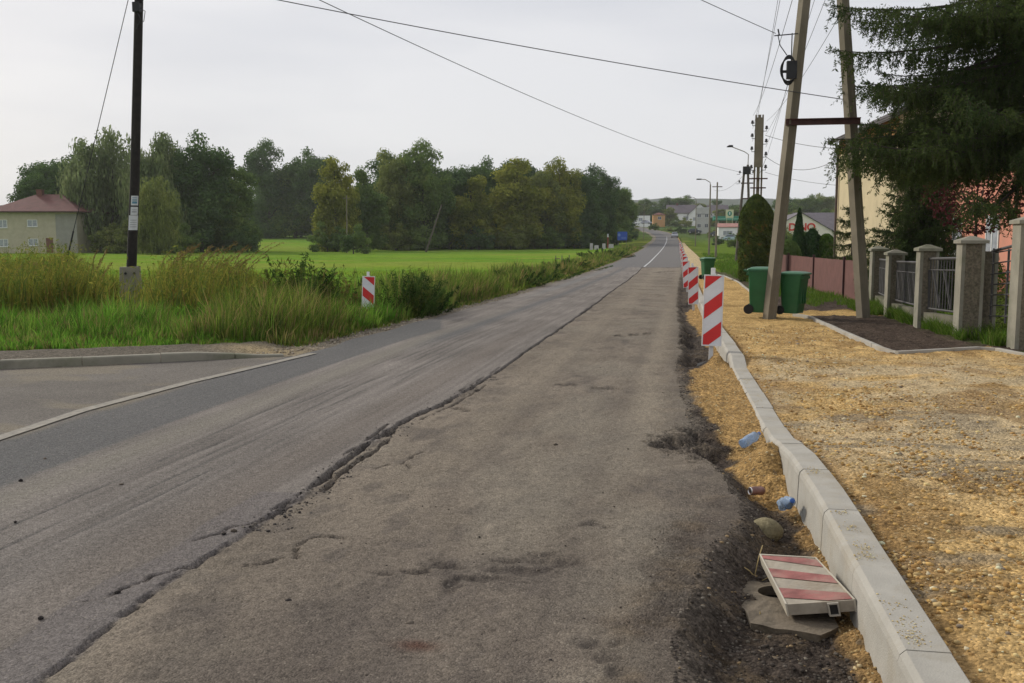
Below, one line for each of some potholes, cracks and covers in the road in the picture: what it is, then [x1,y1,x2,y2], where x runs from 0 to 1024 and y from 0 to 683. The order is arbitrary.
crack [29,268,677,683]
